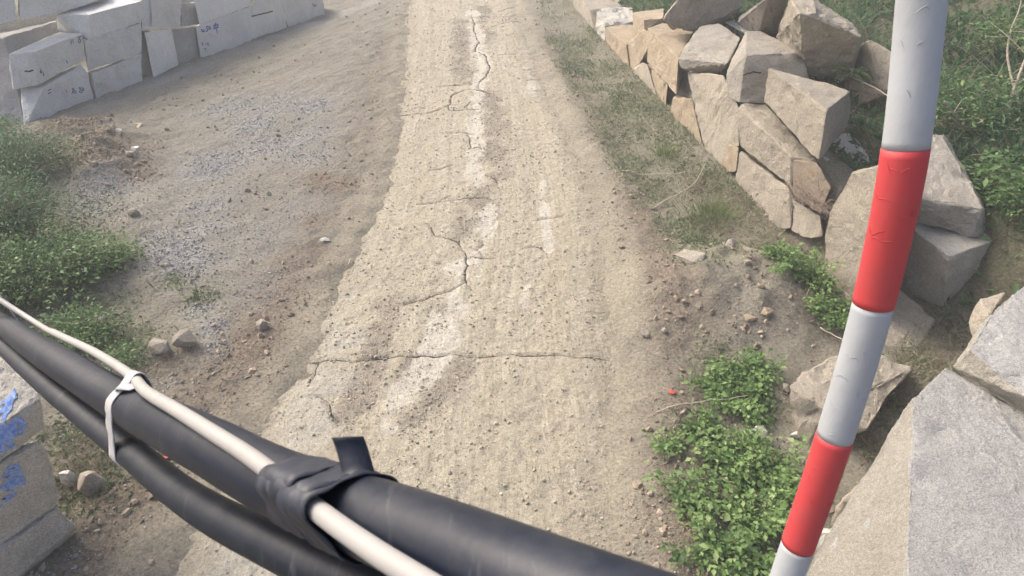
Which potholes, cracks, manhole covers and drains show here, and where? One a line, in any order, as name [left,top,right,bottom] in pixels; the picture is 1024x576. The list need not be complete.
crack [404,8,524,116]
crack [405,225,496,305]
crack [314,354,609,377]
